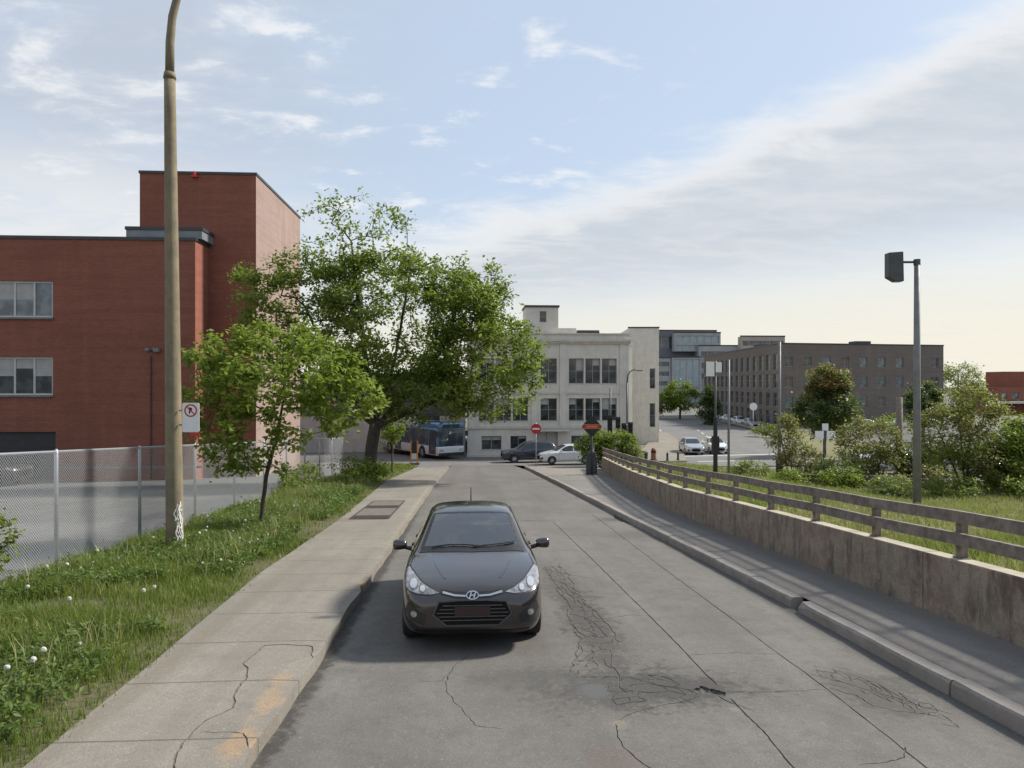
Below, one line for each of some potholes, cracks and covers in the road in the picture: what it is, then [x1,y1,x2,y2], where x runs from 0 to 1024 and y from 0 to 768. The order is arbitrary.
crack [593,515,958,768]
manhole cover [349,500,405,519]
crack [428,655,501,729]
pothole [693,686,726,696]
crack [541,563,700,768]
crack [172,644,313,768]
